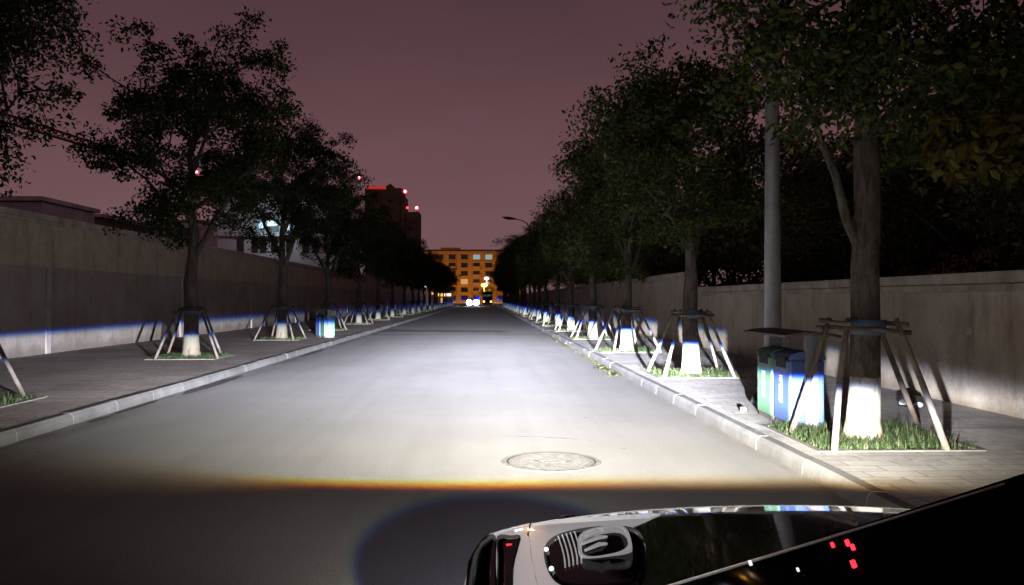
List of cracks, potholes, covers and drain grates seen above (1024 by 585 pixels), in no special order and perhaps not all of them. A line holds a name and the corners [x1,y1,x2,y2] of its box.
manhole cover [502,452,601,472]
